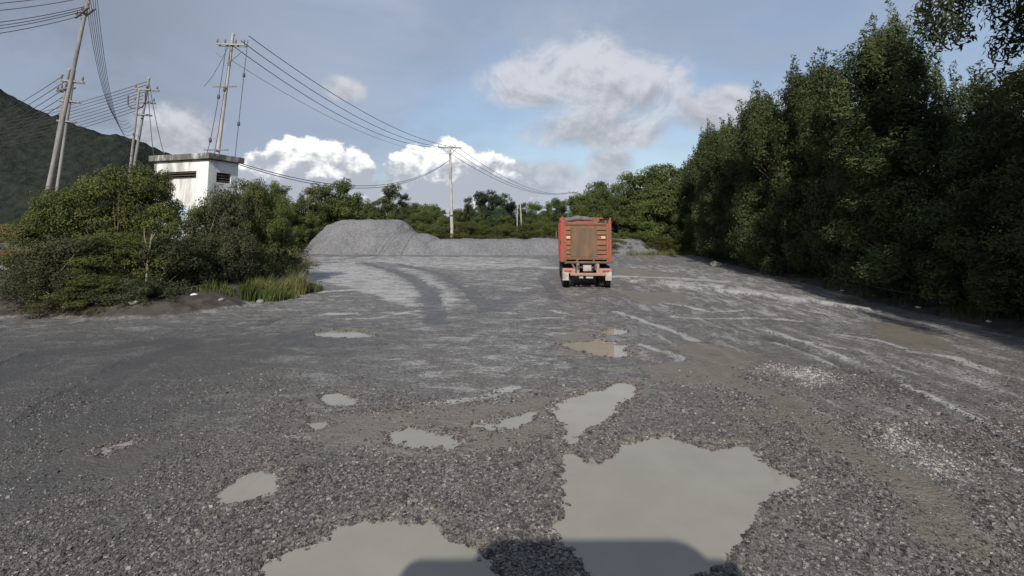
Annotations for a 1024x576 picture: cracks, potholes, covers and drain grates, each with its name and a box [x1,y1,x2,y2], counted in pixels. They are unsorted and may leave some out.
pothole [241,508,514,576]
pothole [307,328,382,338]
pothole [462,409,545,435]
pothole [203,464,290,510]
pothole [538,431,814,576]
pothole [594,327,631,336]
pothole [382,423,477,453]
pothole [299,417,338,432]
pothole [85,432,149,458]
pothole [542,378,649,444]
pothole [551,335,641,358]
pothole [316,389,364,409]
